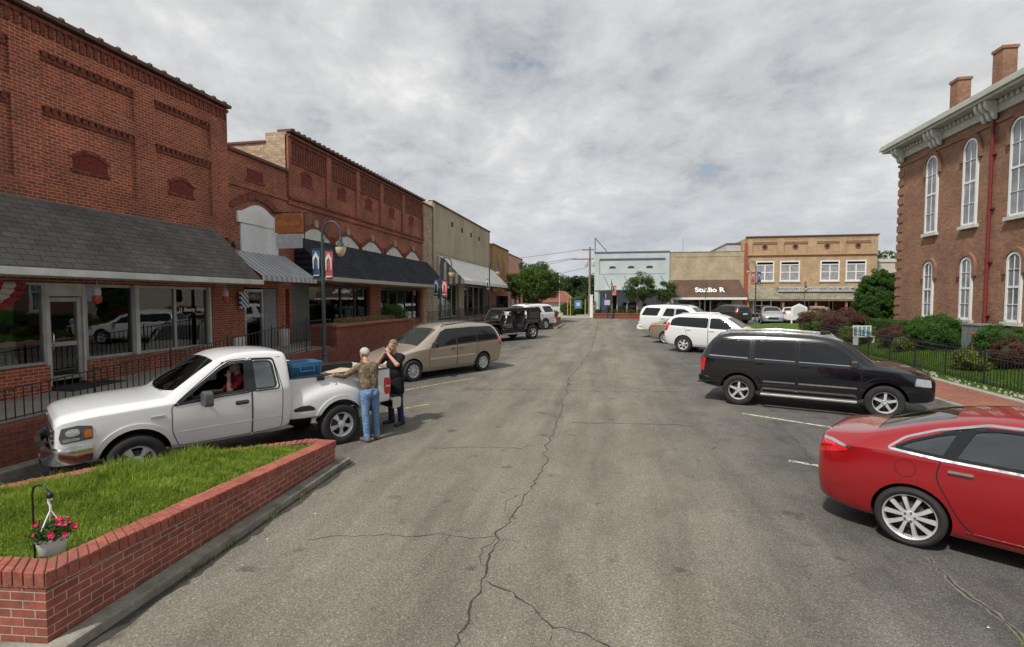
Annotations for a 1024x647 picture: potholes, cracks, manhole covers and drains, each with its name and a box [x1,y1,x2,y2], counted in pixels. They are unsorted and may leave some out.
crack [317,319,658,647]
